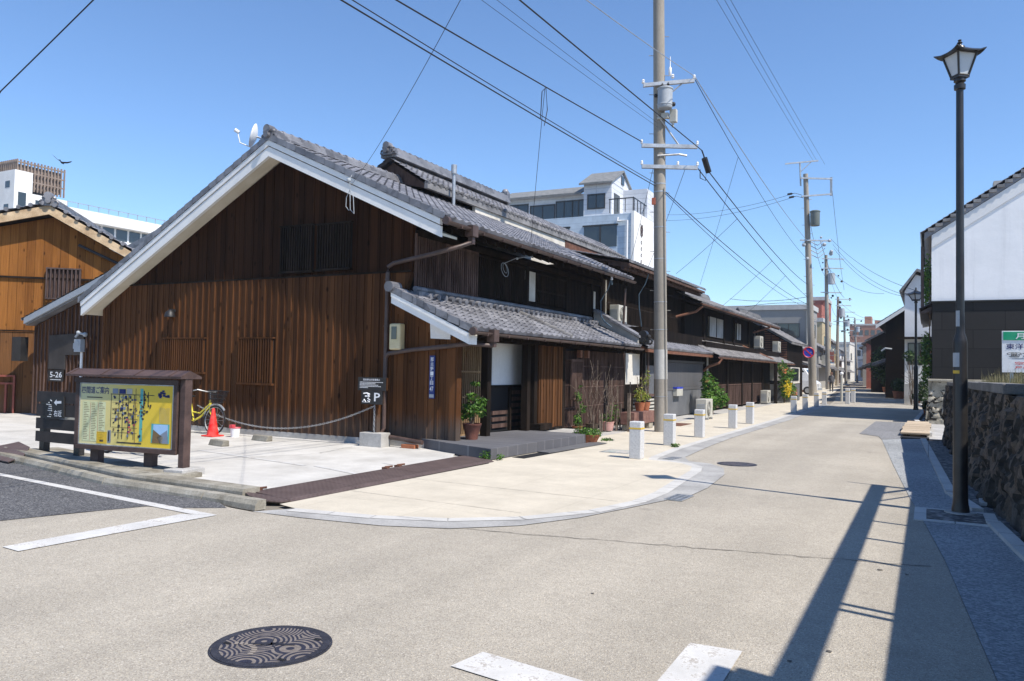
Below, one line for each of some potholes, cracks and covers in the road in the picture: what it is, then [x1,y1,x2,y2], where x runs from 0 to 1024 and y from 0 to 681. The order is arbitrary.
manhole cover [208,625,333,669]
drain grate [664,494,694,502]
